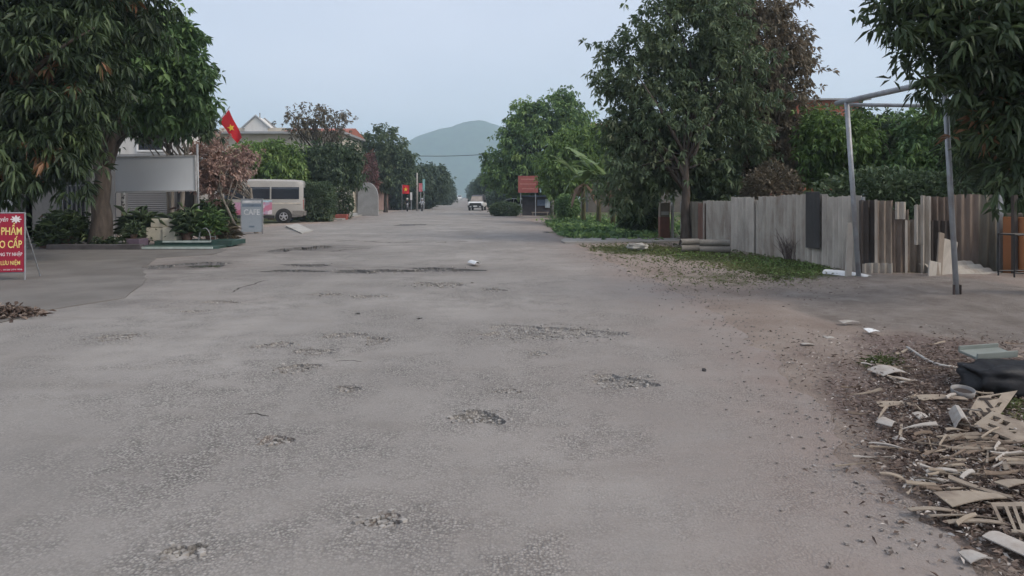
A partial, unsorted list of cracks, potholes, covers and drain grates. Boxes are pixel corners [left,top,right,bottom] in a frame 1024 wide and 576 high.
pothole [334,385,365,393]
pothole [320,332,369,340]
pothole [352,508,408,528]
pothole [158,540,210,563]
pothole [465,323,629,343]
pothole [255,435,295,446]
pothole [292,347,340,355]
pothole [365,336,391,346]
pothole [585,373,661,390]
pothole [251,340,301,349]
pothole [447,408,513,426]
pothole [83,332,147,342]
